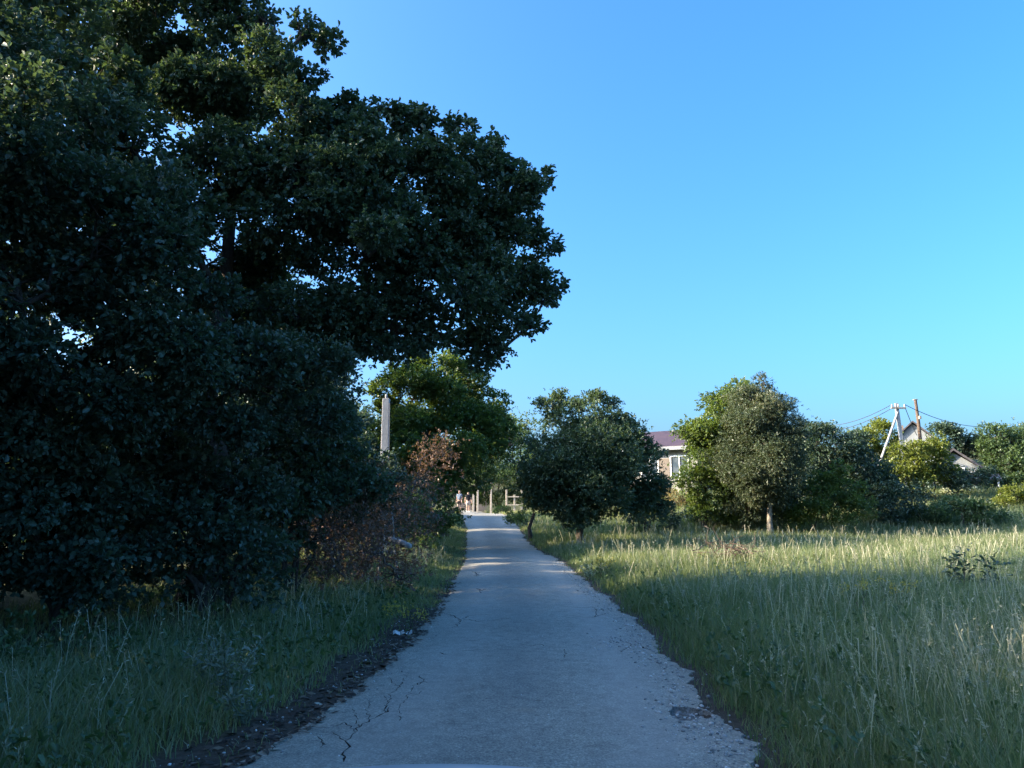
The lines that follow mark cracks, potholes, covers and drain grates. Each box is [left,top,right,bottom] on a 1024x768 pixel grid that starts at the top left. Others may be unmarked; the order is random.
pothole [668,706,713,721]
crack [317,676,426,762]
